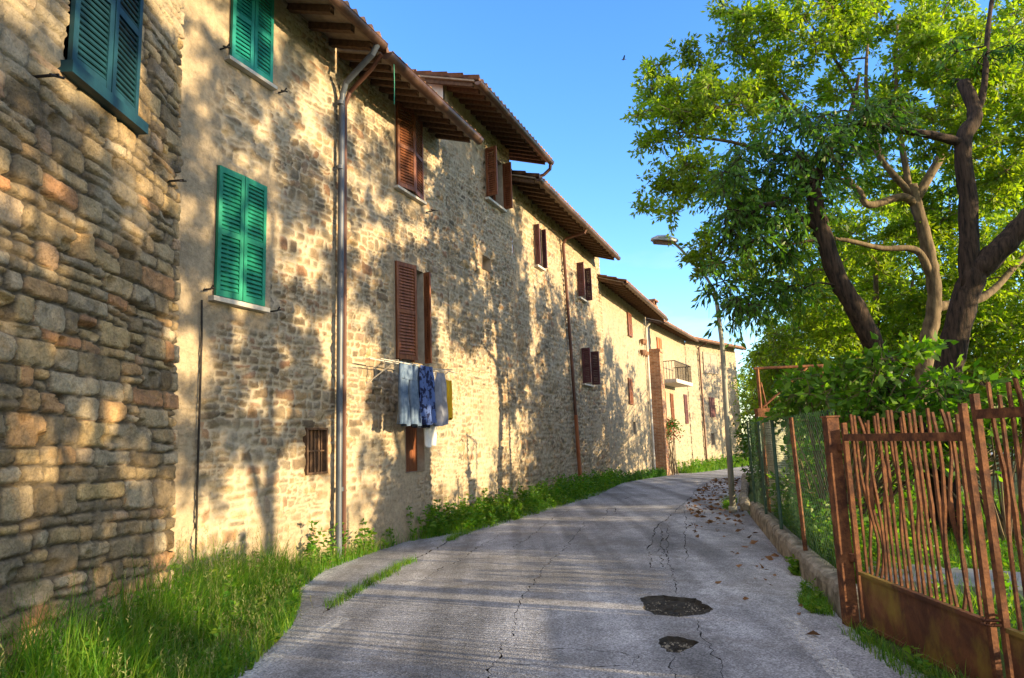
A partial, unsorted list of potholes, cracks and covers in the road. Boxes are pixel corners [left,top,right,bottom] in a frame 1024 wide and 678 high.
pothole [640,595,713,617]
pothole [658,636,699,653]
crack [697,620,723,677]
crack [485,497,639,678]
crack [647,483,703,592]
